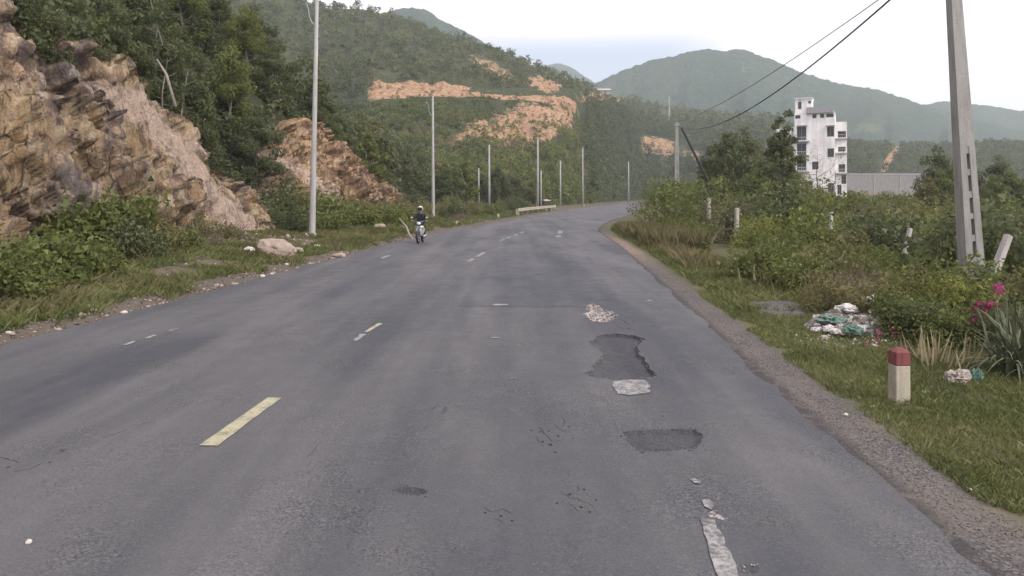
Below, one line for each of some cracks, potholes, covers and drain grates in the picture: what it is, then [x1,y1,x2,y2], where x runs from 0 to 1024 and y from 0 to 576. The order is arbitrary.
pothole [393,485,432,497]
crack [556,485,597,513]
pothole [432,405,448,415]
crack [530,419,574,453]
pothole [583,333,659,381]
